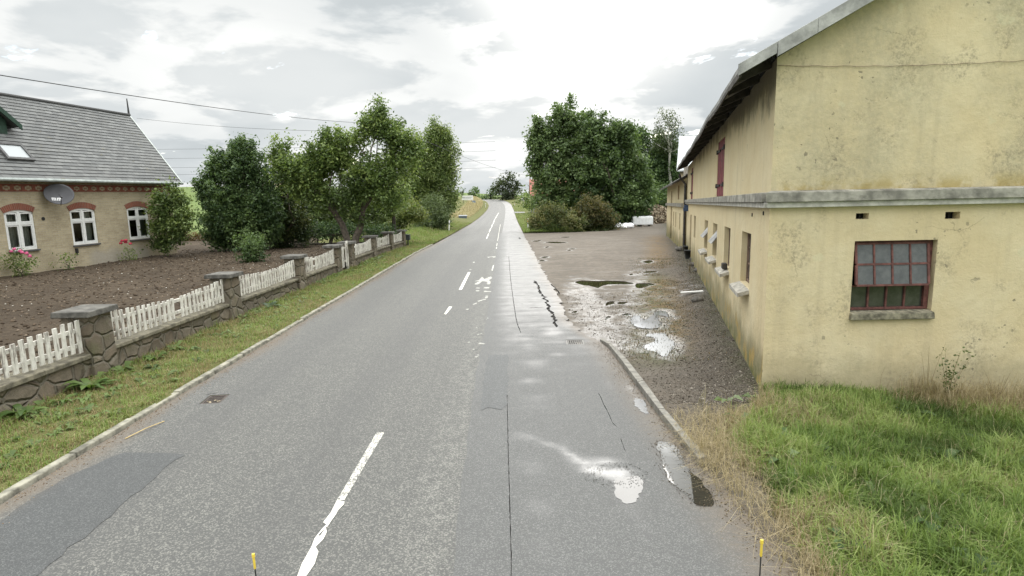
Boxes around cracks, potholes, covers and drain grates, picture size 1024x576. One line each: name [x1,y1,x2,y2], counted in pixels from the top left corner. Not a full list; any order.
crack [533,281,569,327]
pothole [575,280,633,288]
